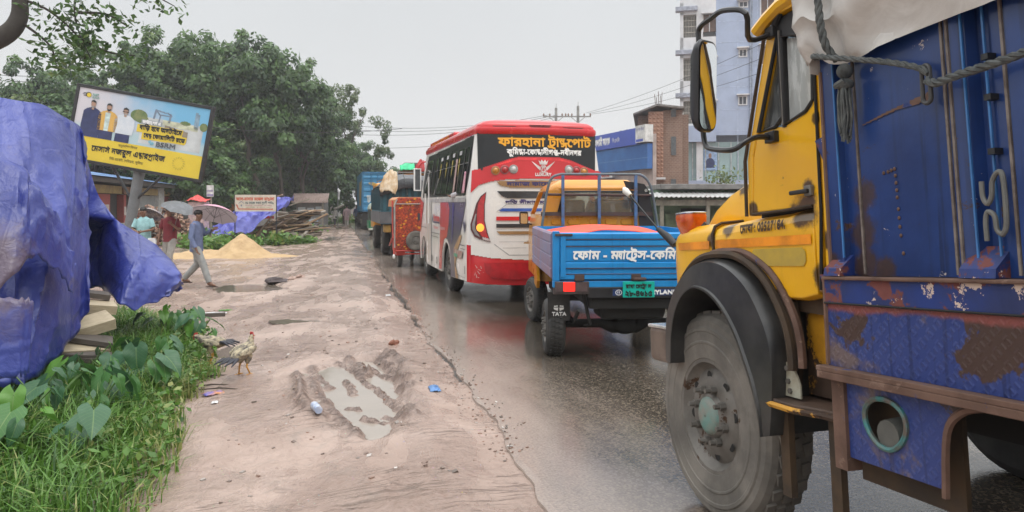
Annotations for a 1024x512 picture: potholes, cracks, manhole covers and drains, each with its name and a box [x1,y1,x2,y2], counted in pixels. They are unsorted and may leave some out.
pothole [285,348,436,444]
pothole [212,281,302,293]
crack [382,275,419,327]
crack [435,351,462,382]
